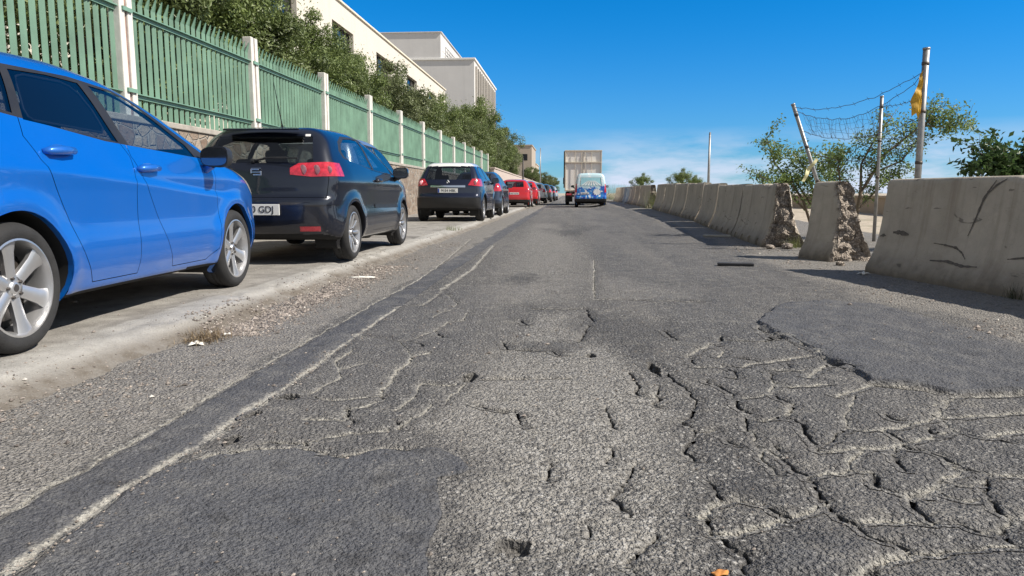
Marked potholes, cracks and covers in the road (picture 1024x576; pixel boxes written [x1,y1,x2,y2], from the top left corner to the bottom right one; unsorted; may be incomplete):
crack [579,323,1024,576]
crack [0,238,581,576]
crack [495,307,601,357]
